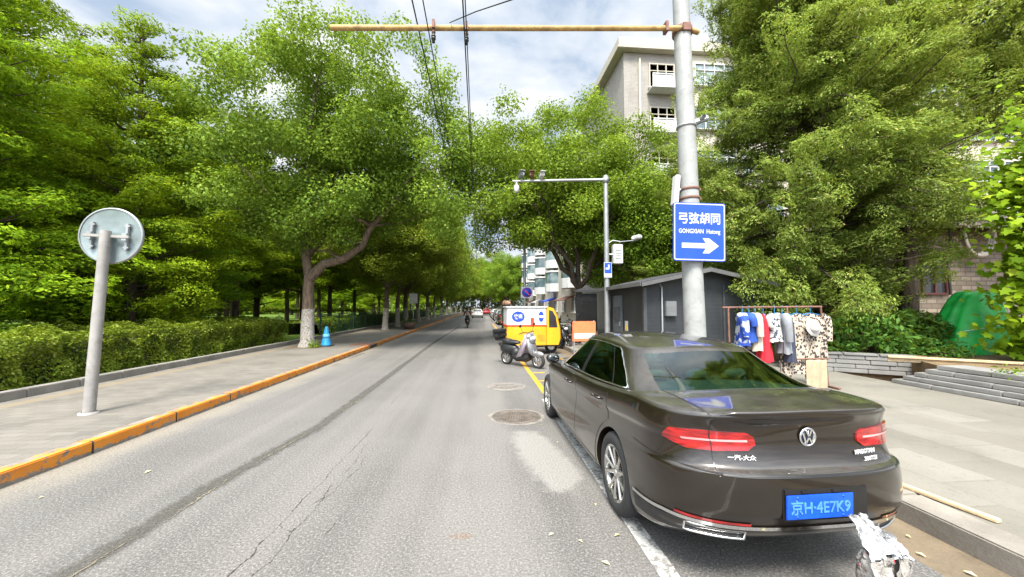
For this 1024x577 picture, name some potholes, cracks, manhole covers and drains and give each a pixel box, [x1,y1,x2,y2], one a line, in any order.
crack [227,430,371,577]
manhole cover [487,383,526,391]
manhole cover [487,409,545,426]
